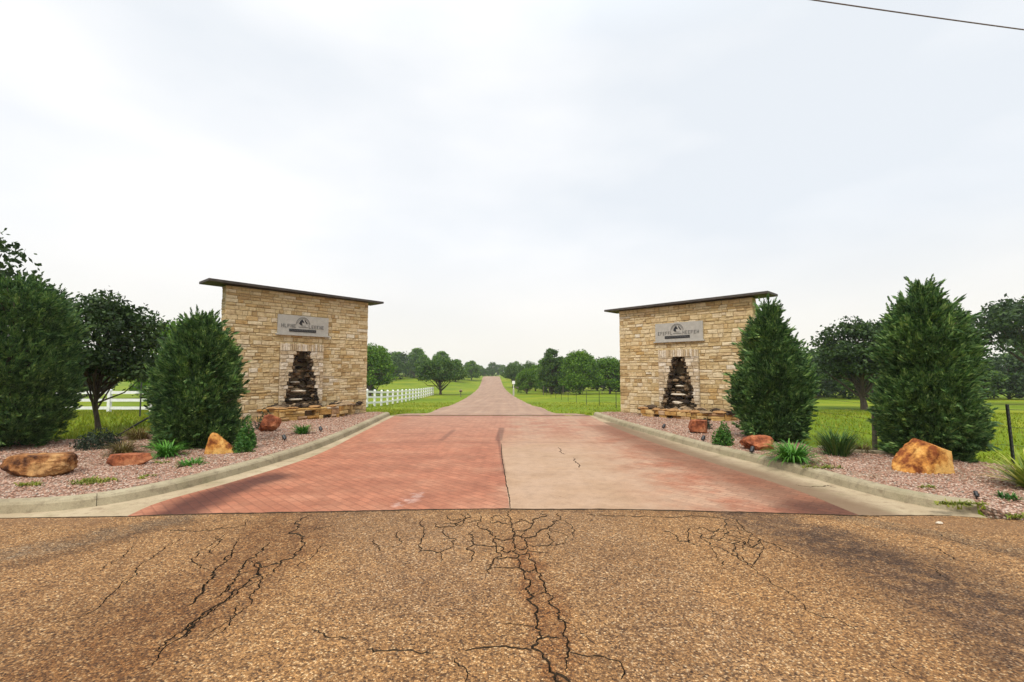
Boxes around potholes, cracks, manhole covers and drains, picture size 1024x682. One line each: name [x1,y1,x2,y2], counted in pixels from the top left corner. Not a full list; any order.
crack [372,510,855,682]
crack [56,515,348,666]
